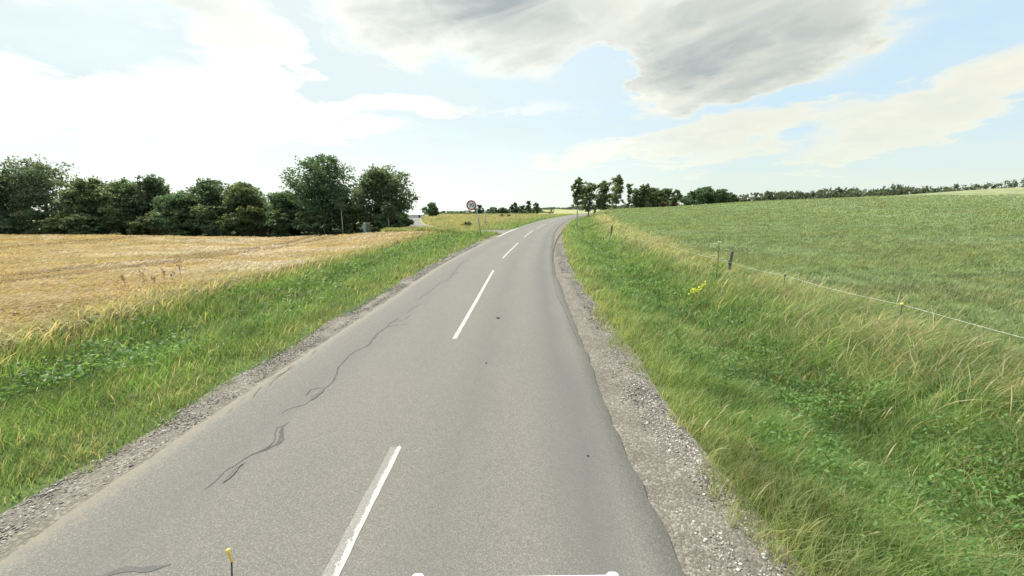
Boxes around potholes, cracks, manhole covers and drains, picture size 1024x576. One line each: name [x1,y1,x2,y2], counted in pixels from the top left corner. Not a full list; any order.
crack [406,259,469,319]
